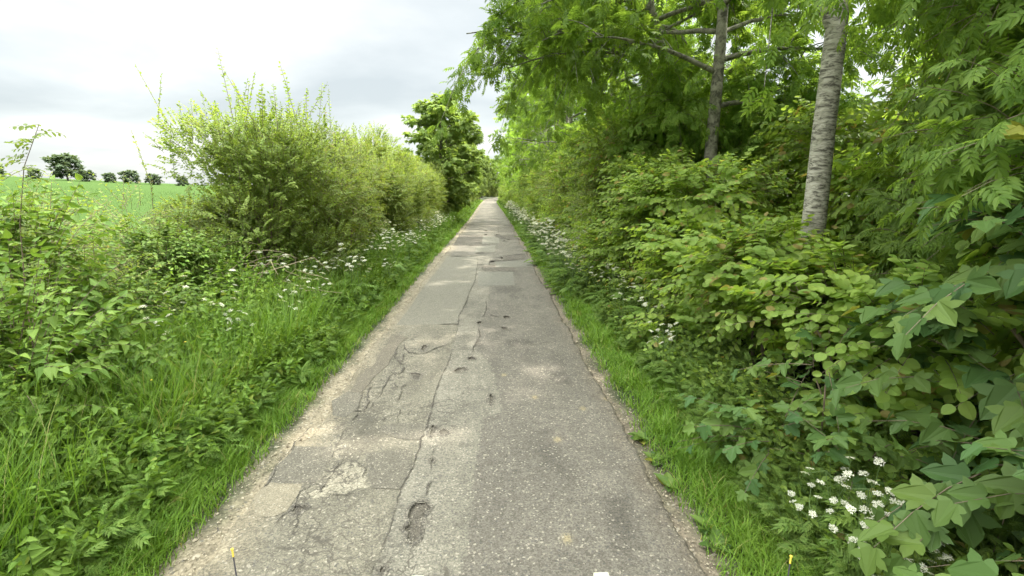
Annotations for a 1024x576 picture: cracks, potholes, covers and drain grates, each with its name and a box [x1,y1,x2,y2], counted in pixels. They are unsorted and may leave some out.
crack [275,341,455,565]
crack [265,424,316,486]
pothole [399,499,434,545]
